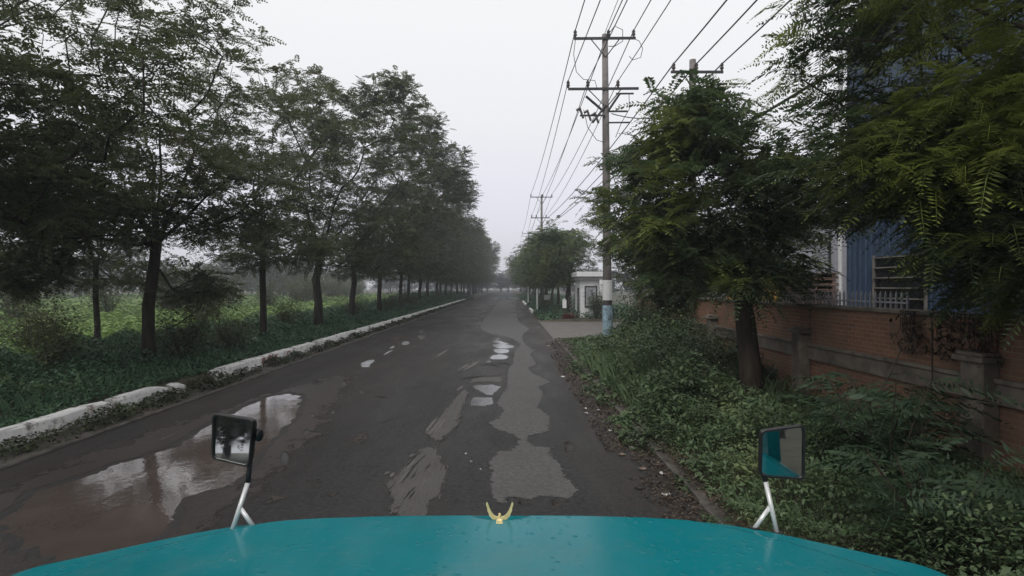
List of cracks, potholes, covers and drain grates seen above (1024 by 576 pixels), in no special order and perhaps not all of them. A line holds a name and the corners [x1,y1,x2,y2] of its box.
pothole [0,392,308,564]
pothole [469,396,495,406]
pothole [472,383,503,395]
pothole [484,337,516,362]
